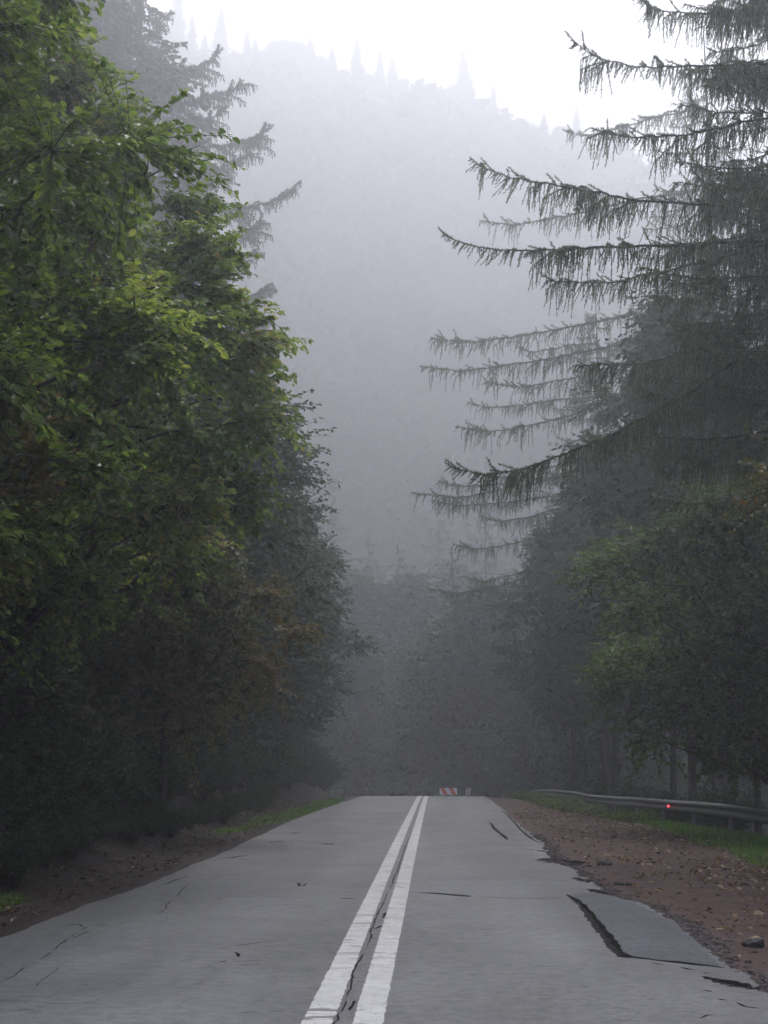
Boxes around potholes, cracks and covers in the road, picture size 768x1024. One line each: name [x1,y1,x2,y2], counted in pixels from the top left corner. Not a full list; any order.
crack [566,894,755,1019]
crack [489,811,549,852]
crack [3,924,88,986]
